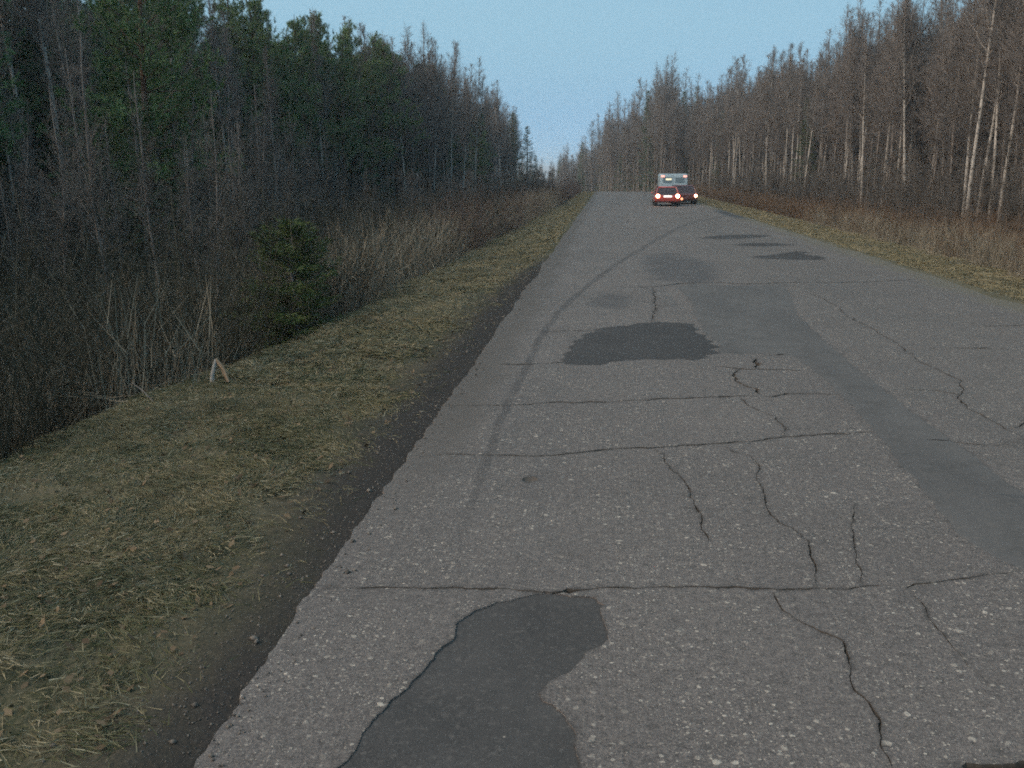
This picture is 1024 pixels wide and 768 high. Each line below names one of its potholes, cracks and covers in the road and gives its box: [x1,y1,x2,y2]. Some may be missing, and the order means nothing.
crack [331,354,1012,766]
crack [633,279,911,321]
crack [815,295,1024,446]
